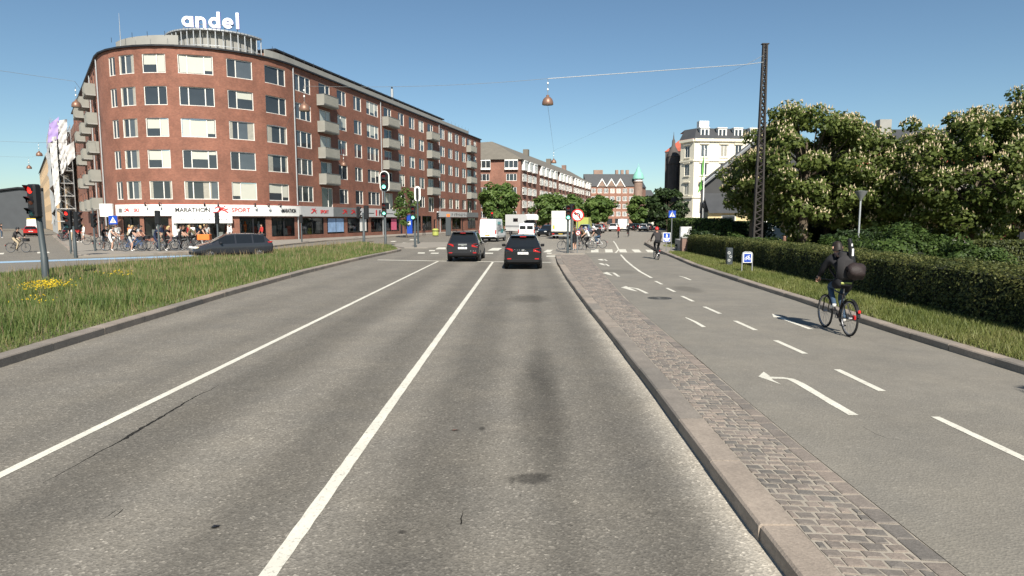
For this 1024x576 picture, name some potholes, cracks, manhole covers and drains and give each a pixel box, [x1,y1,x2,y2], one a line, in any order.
crack [43,386,217,483]
